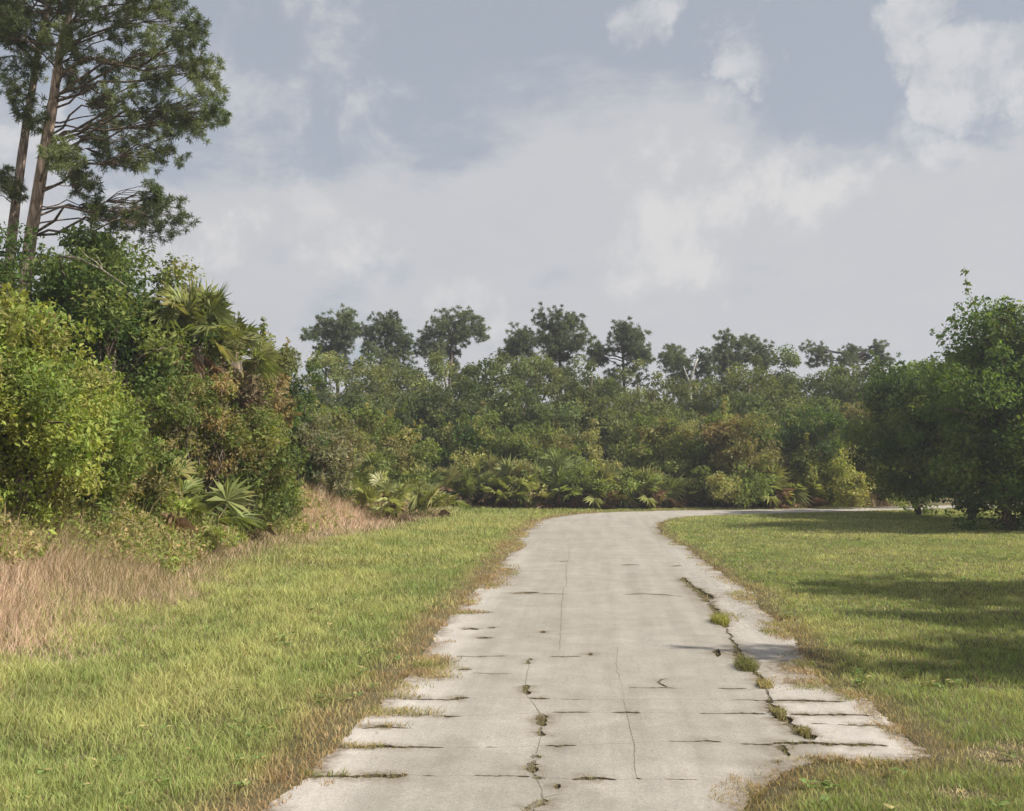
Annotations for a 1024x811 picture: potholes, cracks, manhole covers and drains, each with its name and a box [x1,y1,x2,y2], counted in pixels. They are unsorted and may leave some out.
crack [311,549,888,811]
